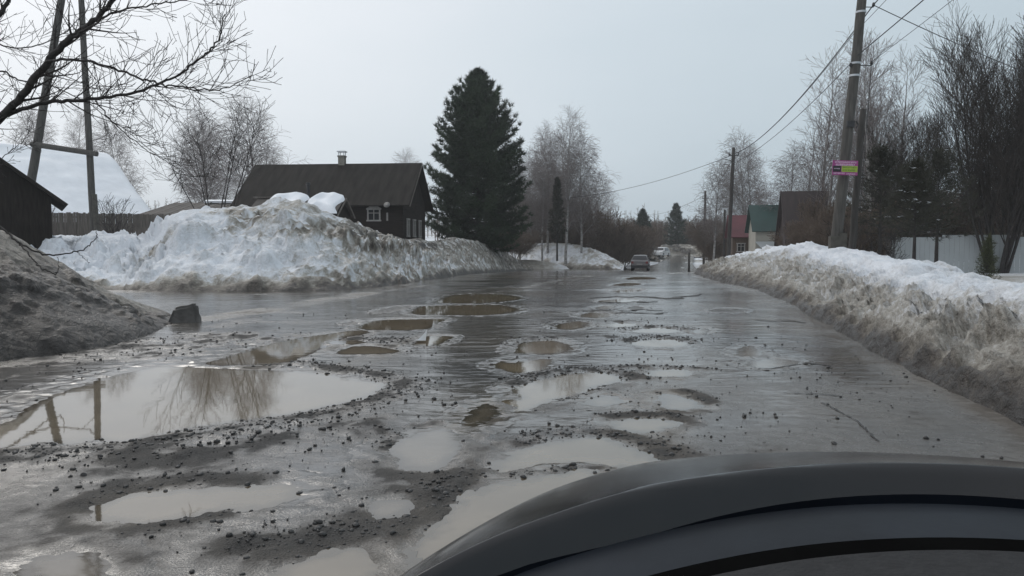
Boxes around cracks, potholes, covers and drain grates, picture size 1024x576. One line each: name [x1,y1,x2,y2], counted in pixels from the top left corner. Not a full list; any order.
pothole [325,343,414,356]
pothole [495,336,588,356]
pothole [346,420,496,483]
pothole [188,328,385,368]
pothole [466,367,648,420]
pothole [0,360,434,463]
pothole [344,317,457,332]
pothole [450,427,709,479]
pothole [399,303,530,317]
pothole [542,320,601,331]
